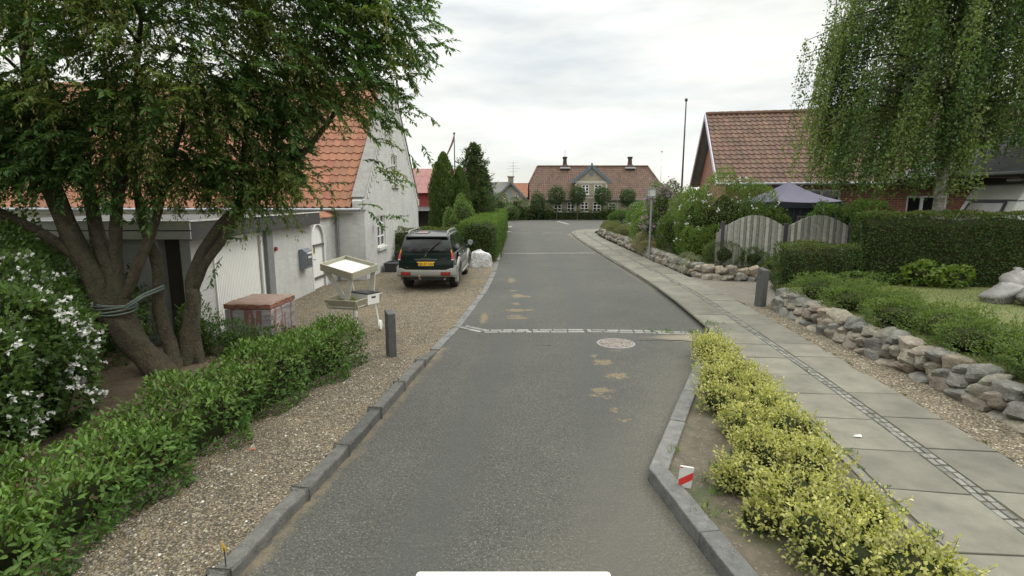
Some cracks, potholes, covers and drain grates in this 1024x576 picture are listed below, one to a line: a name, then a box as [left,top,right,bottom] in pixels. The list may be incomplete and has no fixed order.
manhole cover [597,338,635,349]
